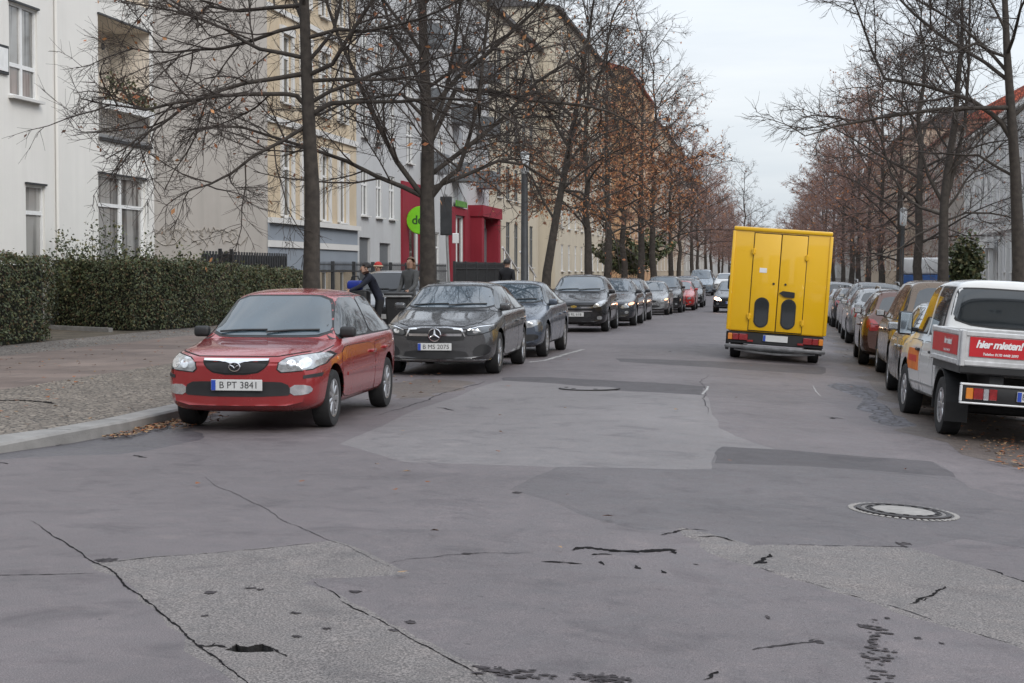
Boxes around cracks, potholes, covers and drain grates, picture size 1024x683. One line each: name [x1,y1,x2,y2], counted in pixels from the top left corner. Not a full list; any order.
pothole [225,644,275,652]
manhole cover [848,502,960,521]
crack [544,529,733,573]
crack [910,586,946,604]
